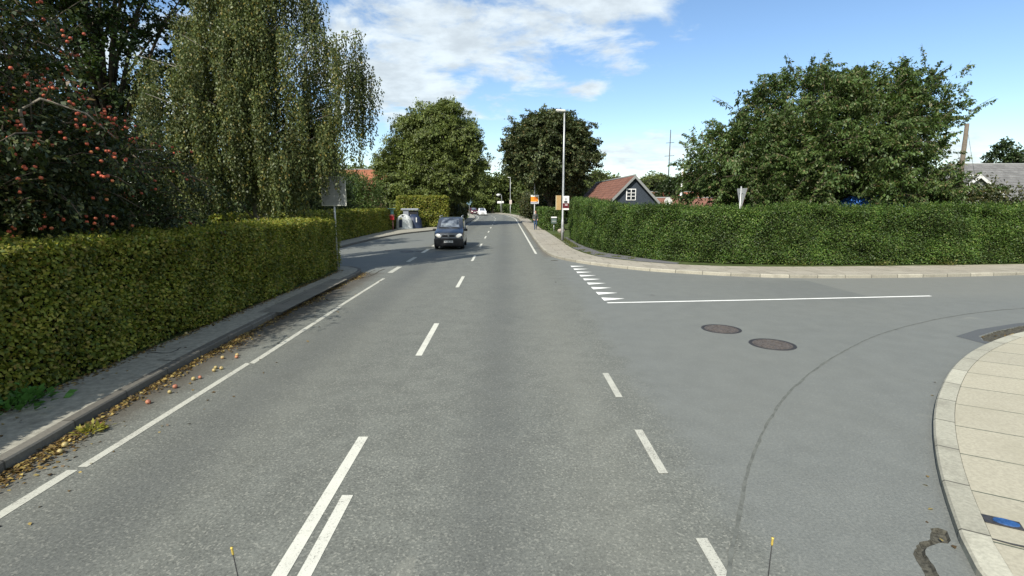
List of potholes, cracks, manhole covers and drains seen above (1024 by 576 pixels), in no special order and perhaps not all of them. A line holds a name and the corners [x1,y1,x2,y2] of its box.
manhole cover [749,338,797,351]
manhole cover [701,324,742,334]
